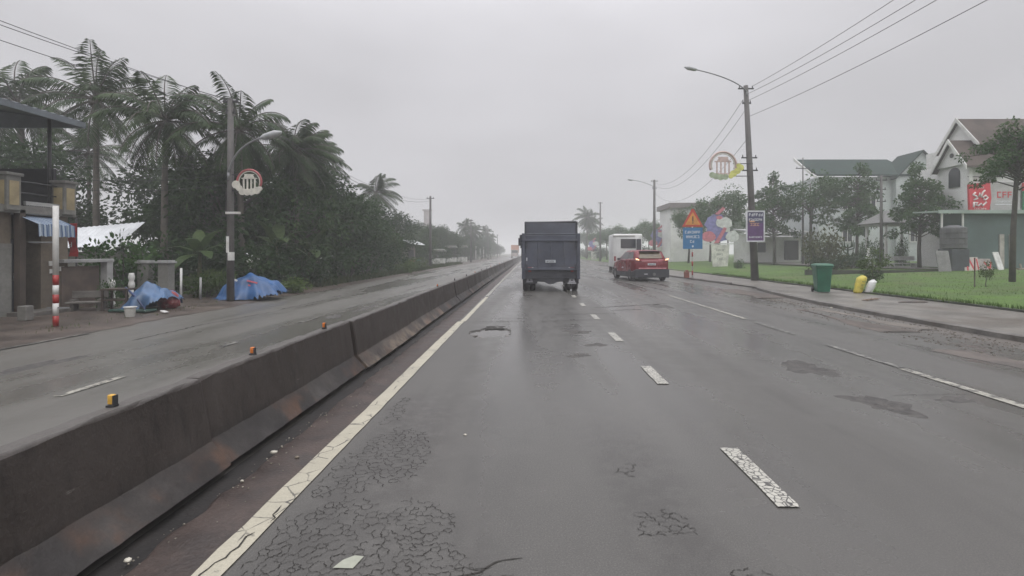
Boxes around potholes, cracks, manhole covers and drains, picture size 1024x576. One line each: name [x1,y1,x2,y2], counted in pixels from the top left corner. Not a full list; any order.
crack [198,397,518,576]
crack [634,509,697,536]
pothole [469,326,511,339]
